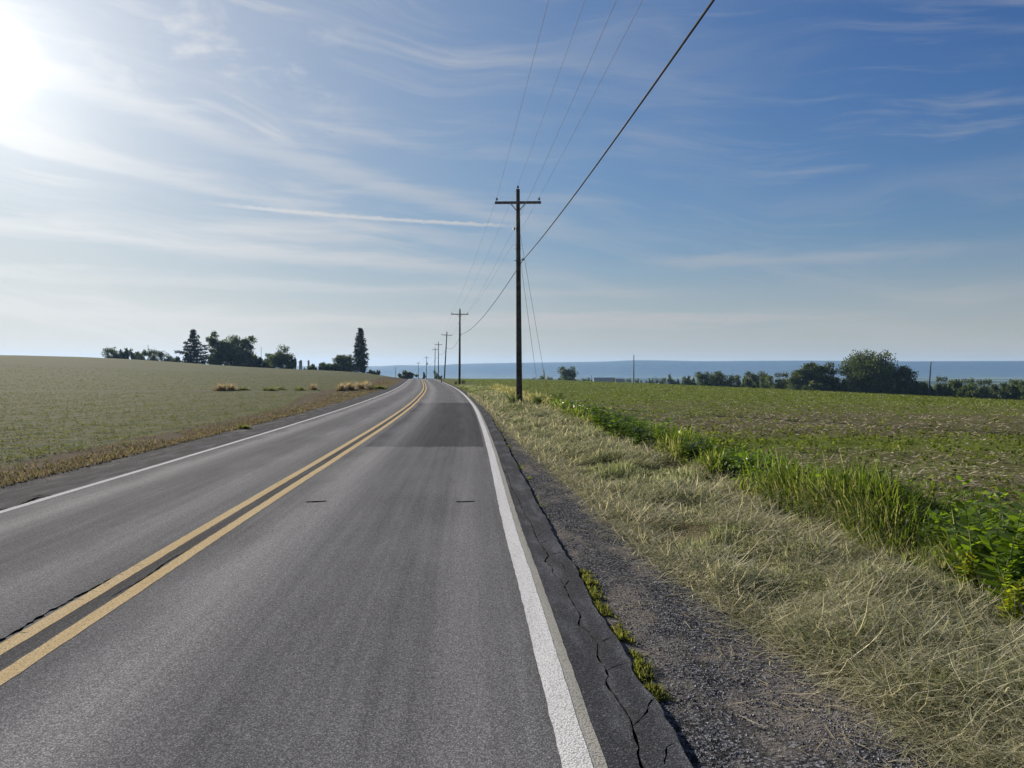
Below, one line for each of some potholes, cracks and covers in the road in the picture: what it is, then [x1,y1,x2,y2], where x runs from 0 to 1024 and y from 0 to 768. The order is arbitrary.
crack [500,462,674,768]
